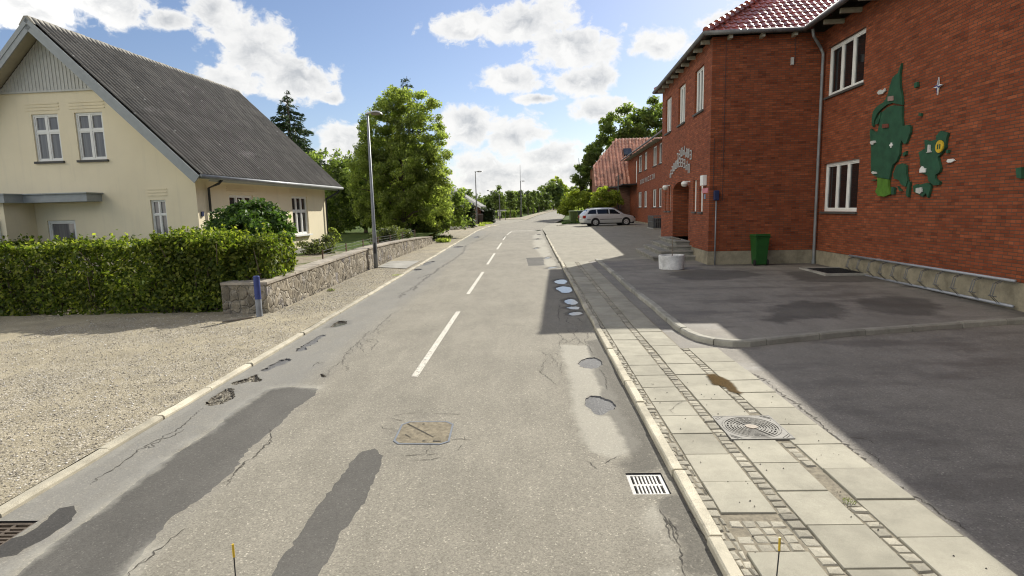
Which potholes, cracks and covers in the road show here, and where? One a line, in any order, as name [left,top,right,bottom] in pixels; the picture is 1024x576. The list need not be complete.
manhole cover [712,415,795,441]
pothole [585,396,616,415]
pothole [578,357,603,369]
pothole [231,374,262,385]
drain grate [625,473,671,494]
pothole [297,335,325,351]
drain grate [0,521,37,546]
crack [128,530,182,575]
crack [90,409,201,485]
crack [659,509,707,576]
manhole cover [393,421,454,445]
